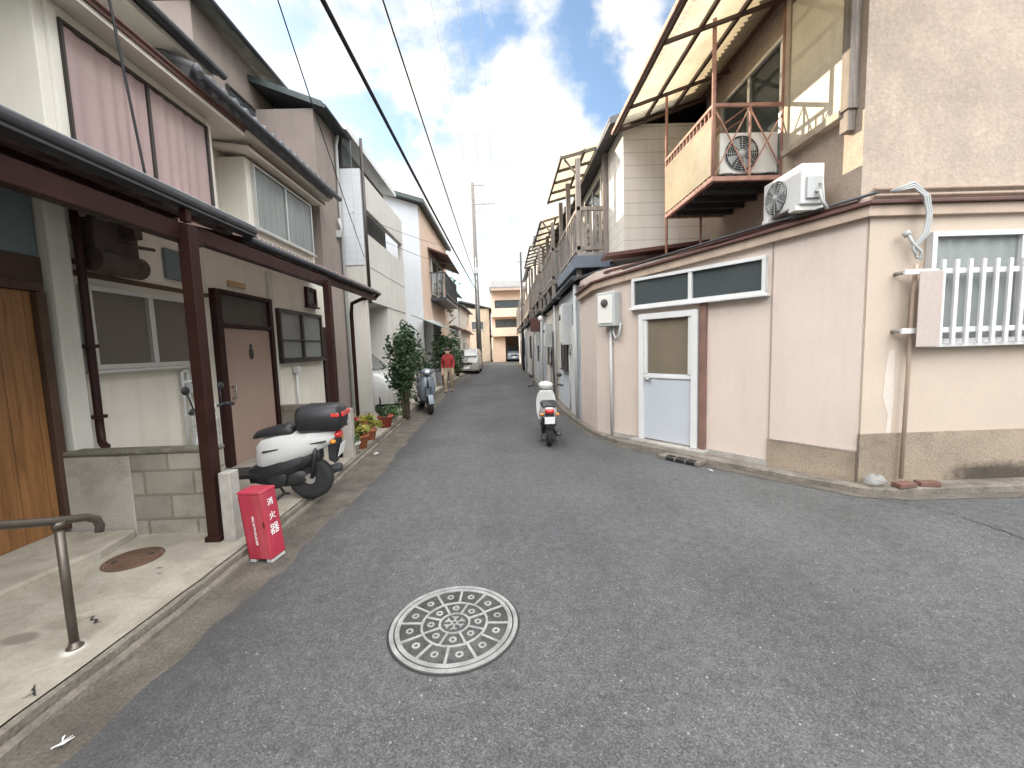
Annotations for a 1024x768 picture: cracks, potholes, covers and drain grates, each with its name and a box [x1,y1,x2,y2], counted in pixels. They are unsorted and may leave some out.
drain grate [659,452,707,467]
manhole cover [99,547,165,572]
manhole cover [386,586,520,677]
